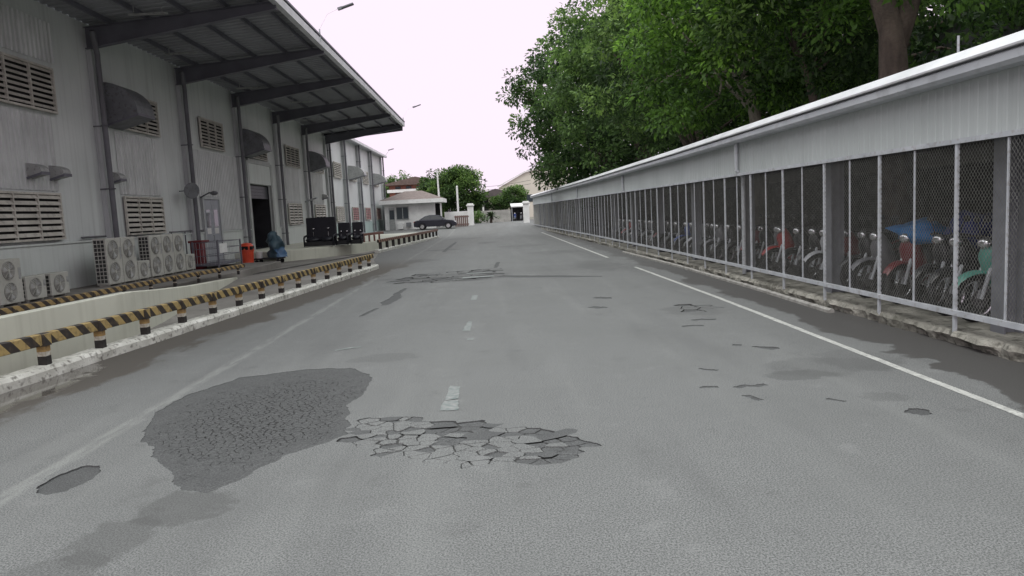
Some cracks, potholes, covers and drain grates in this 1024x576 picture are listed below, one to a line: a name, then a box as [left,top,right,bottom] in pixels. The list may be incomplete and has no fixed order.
crack [699,368,766,401]
crack [673,304,722,327]
crack [589,297,612,309]
crack [361,242,602,316]
crack [140,368,602,493]
